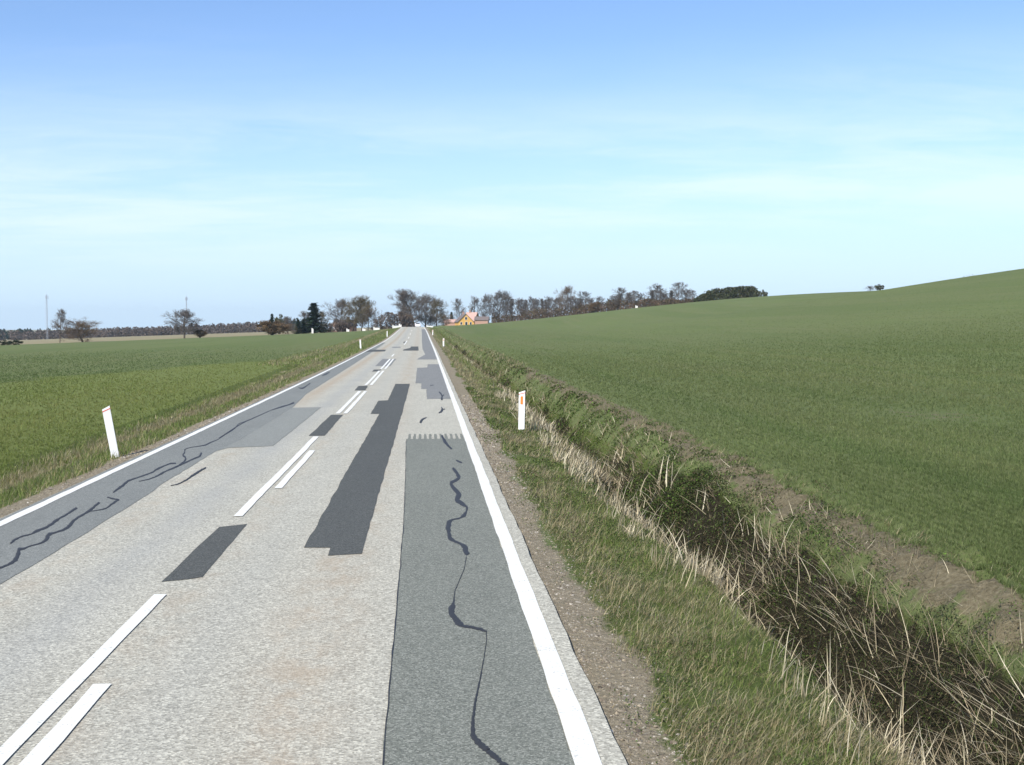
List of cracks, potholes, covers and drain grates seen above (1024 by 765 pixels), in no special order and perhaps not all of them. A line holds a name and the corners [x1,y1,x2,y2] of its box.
crack [170,467,206,486]
